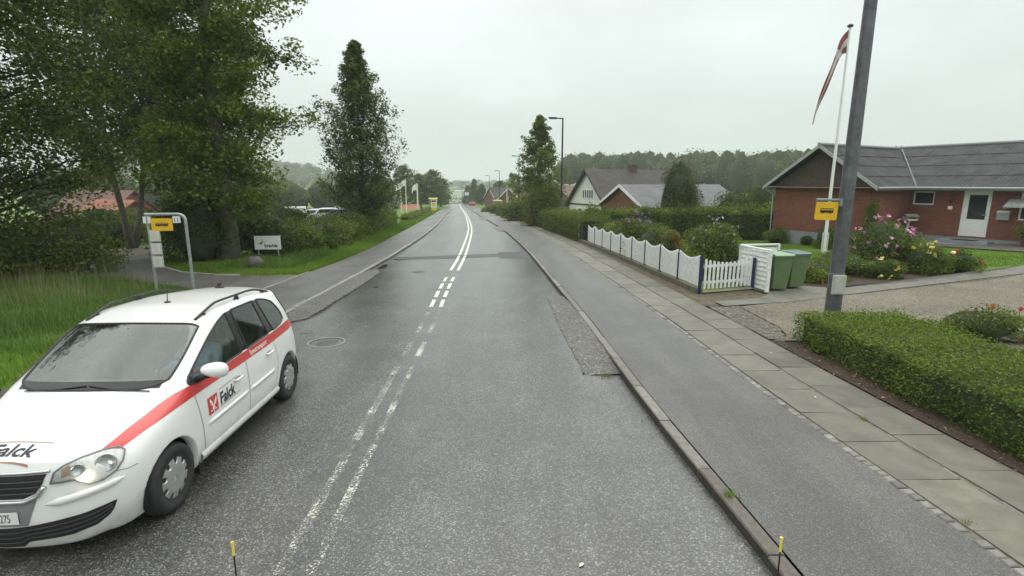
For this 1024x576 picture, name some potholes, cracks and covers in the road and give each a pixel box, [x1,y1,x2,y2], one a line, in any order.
manhole cover [307,337,346,348]
